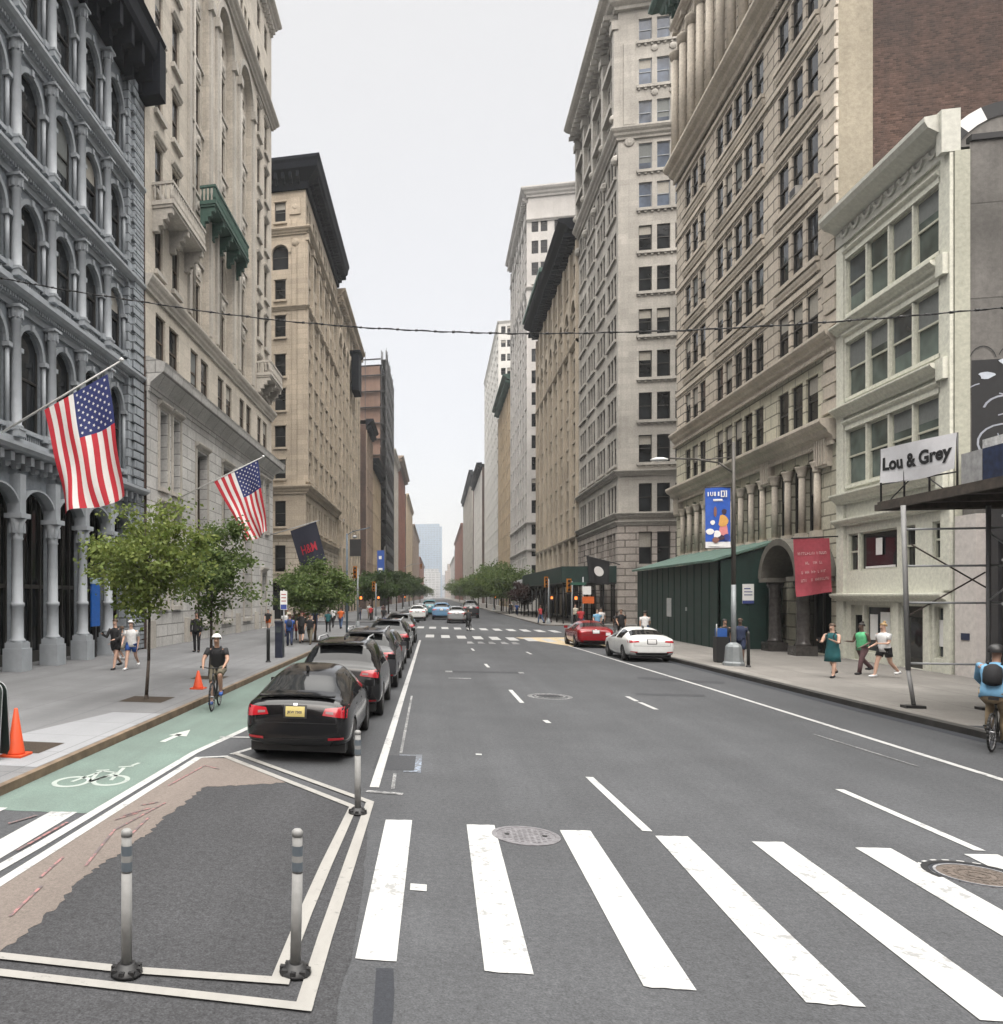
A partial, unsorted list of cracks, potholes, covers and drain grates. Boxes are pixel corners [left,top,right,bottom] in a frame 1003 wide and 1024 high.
manhole cover [492,826,561,846]
manhole cover [929,863,1003,889]
